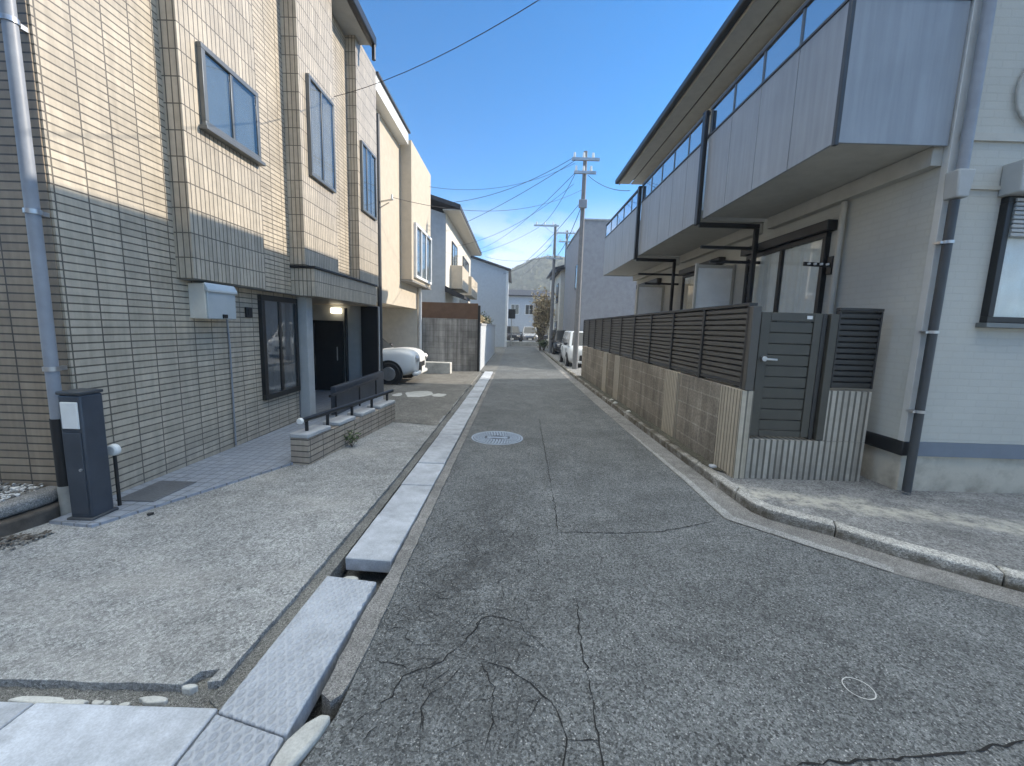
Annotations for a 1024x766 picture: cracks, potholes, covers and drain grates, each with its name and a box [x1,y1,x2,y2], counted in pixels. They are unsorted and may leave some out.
manhole cover [471,431,523,445]
crack [786,740,1024,766]
crack [337,499,605,766]
